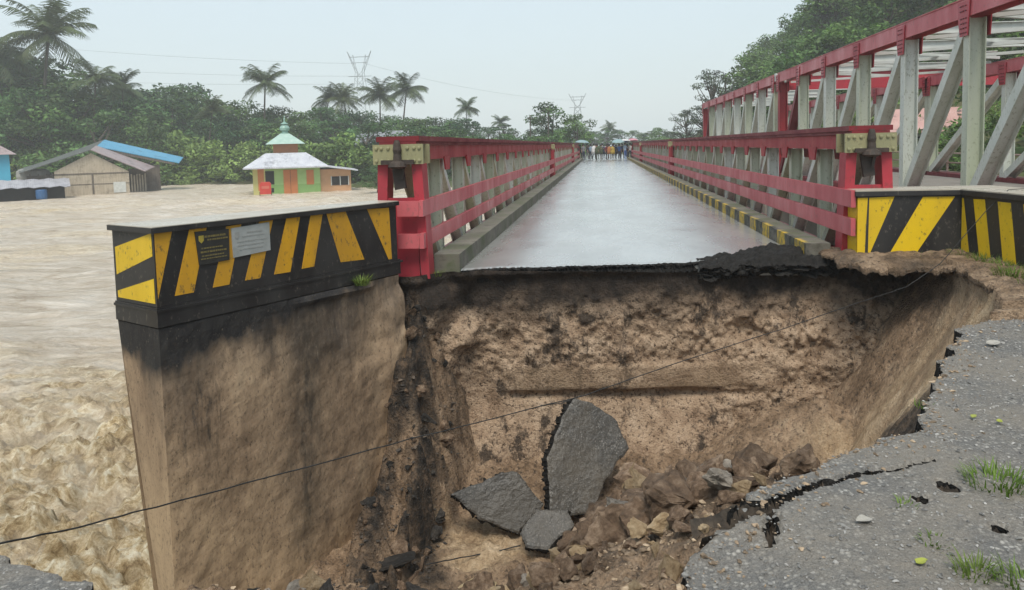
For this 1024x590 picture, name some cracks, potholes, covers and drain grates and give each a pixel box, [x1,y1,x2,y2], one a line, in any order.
crack [690,474,872,548]
